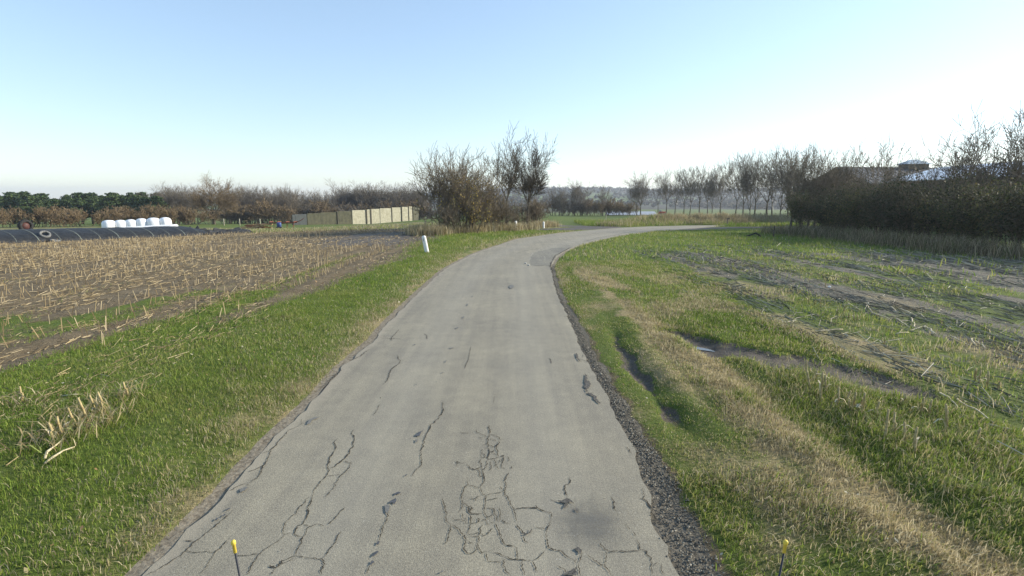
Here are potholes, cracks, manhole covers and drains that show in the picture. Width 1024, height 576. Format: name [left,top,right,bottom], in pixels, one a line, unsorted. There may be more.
crack [230,420,302,491]
crack [442,427,663,576]
crack [412,407,444,475]
crack [147,433,355,575]
